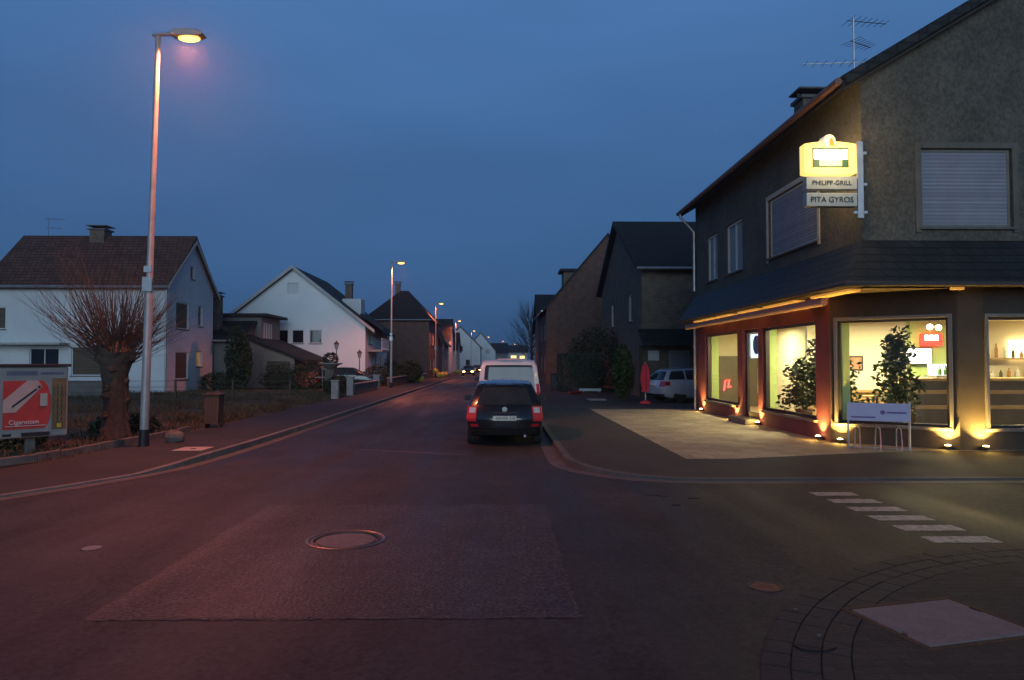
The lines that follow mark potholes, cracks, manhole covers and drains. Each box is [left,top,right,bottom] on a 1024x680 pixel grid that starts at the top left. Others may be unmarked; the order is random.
manhole cover [747,581,784,592]
manhole cover [305,530,387,550]
manhole cover [840,596,1024,652]
